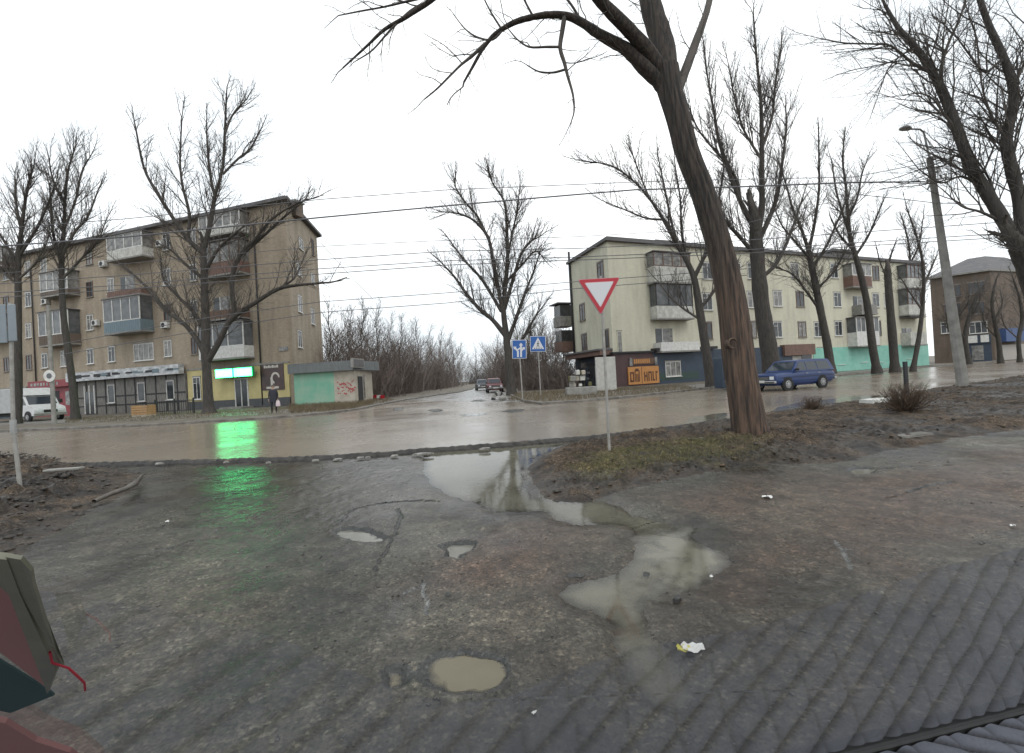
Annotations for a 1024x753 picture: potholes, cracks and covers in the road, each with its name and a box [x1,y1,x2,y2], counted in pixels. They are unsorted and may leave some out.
pothole [412,648,511,694]
pothole [378,663,415,688]
pothole [330,526,390,543]
crack [335,499,422,571]
pothole [436,539,479,559]
